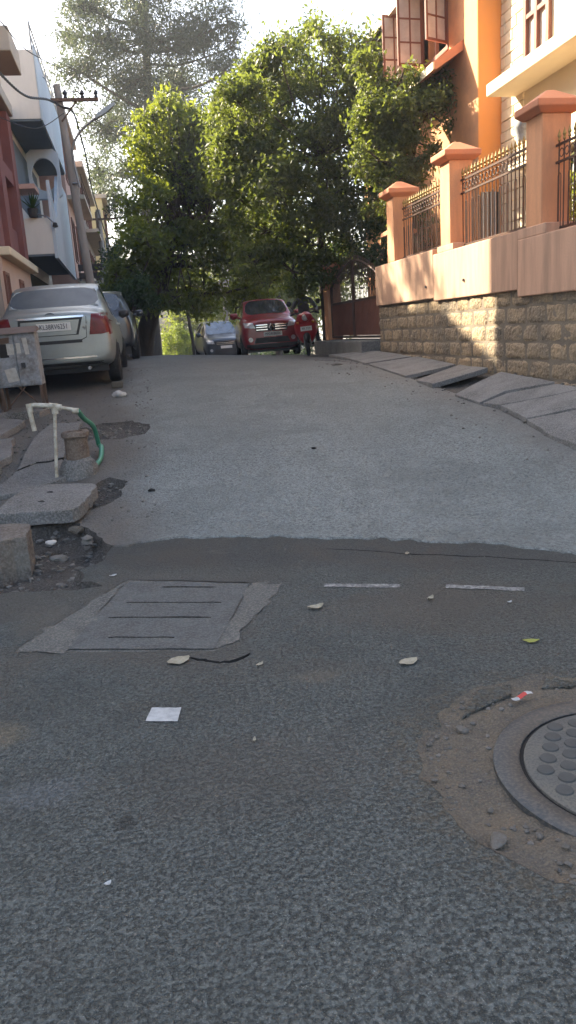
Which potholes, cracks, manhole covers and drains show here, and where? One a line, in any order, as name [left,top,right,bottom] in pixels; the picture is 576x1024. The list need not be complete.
manhole cover [493,701,576,837]
pothole [0,523,111,594]
manhole cover [15,580,283,654]
pothole [88,477,128,511]
crack [189,653,250,664]
pothole [81,420,150,441]
